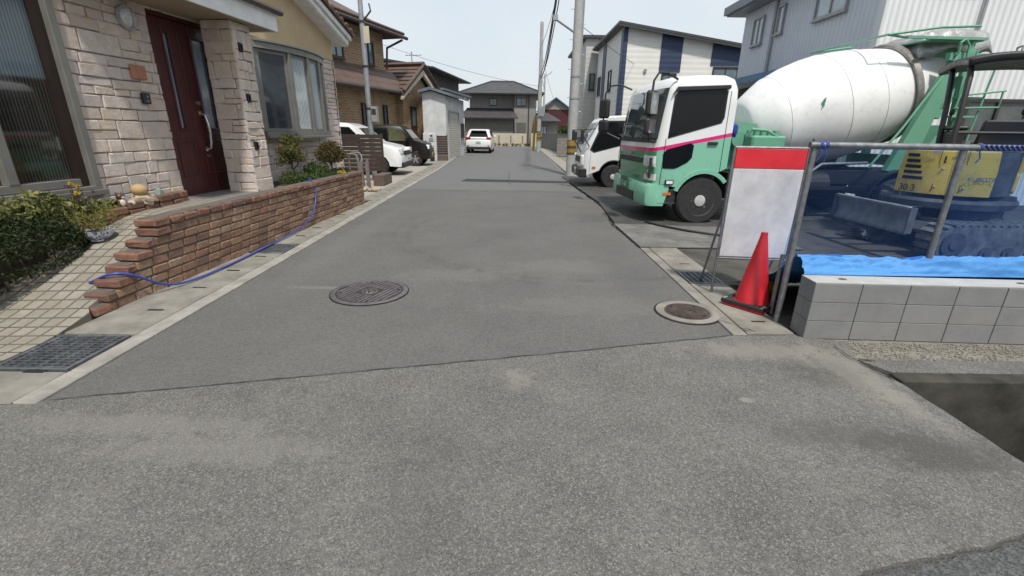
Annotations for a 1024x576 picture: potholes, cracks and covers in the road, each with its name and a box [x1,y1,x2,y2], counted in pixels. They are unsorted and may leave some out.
drain grate [677,271,725,285]
manhole cover [329,280,409,306]
manhole cover [654,300,720,325]
drain grate [0,334,131,373]
